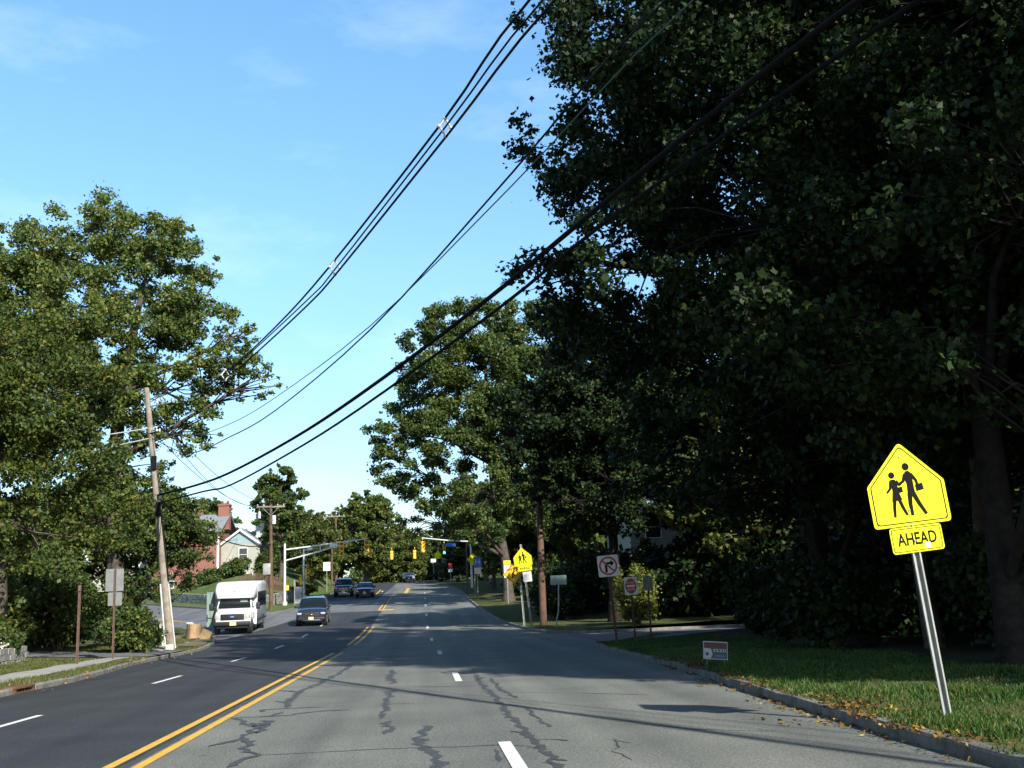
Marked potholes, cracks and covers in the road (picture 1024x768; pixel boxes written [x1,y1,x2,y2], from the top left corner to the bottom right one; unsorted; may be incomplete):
crack [268,674,569,768]
crack [611,724,746,760]
